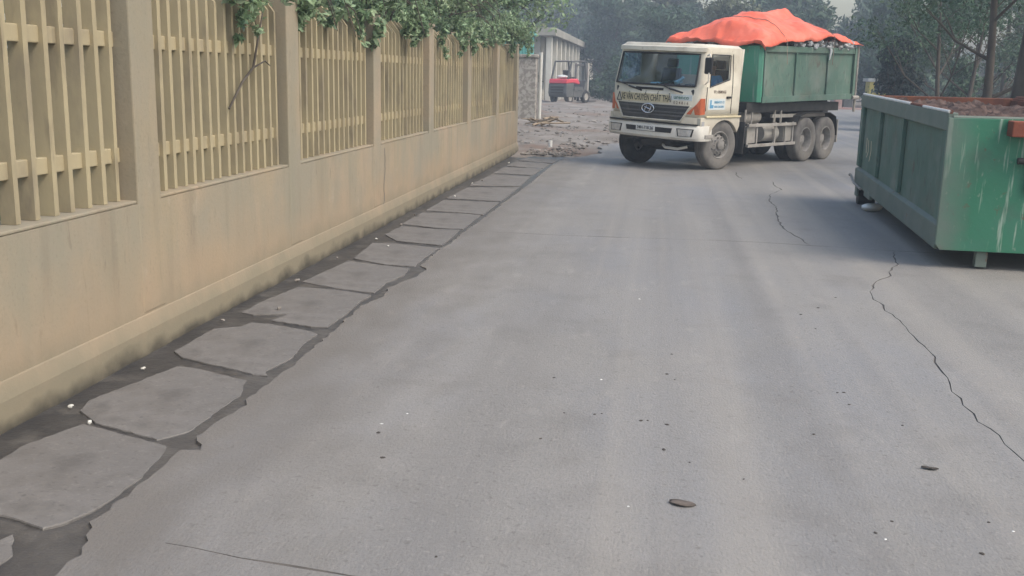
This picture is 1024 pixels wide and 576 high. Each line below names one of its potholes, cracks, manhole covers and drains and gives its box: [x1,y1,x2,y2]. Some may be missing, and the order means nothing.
crack [769,182,804,242]
crack [870,253,1024,461]
